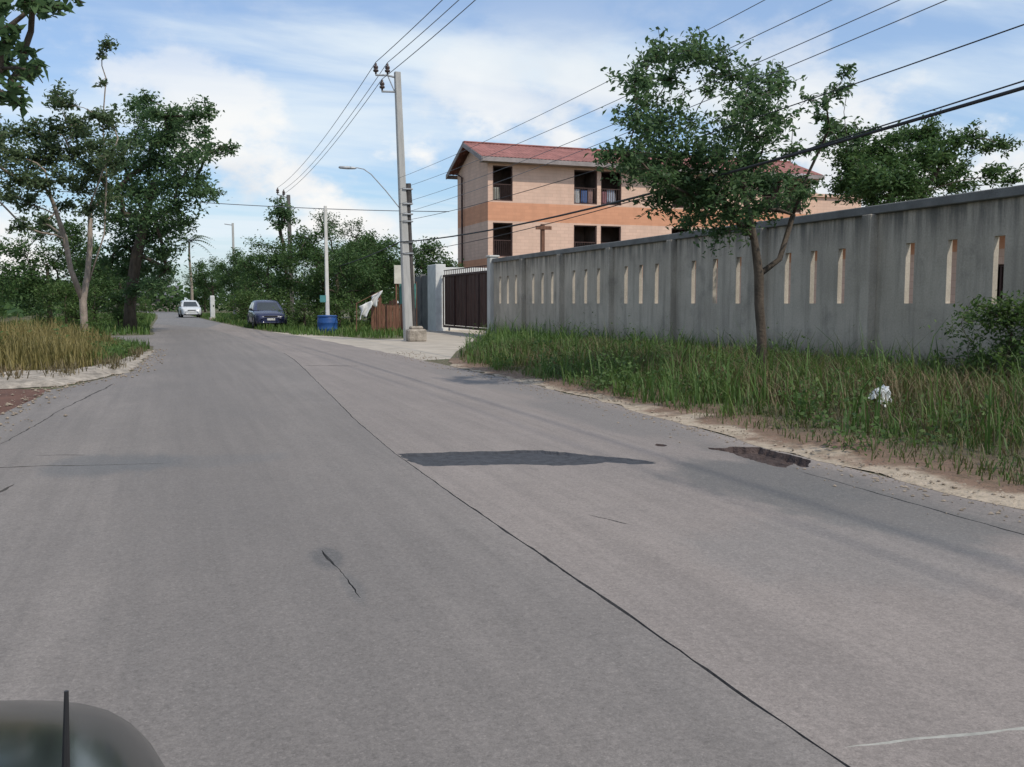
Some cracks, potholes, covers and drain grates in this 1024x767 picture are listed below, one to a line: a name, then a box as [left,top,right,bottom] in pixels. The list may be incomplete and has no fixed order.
crack [3,384,112,443]
crack [284,353,1024,767]
pothole [709,447,811,468]
